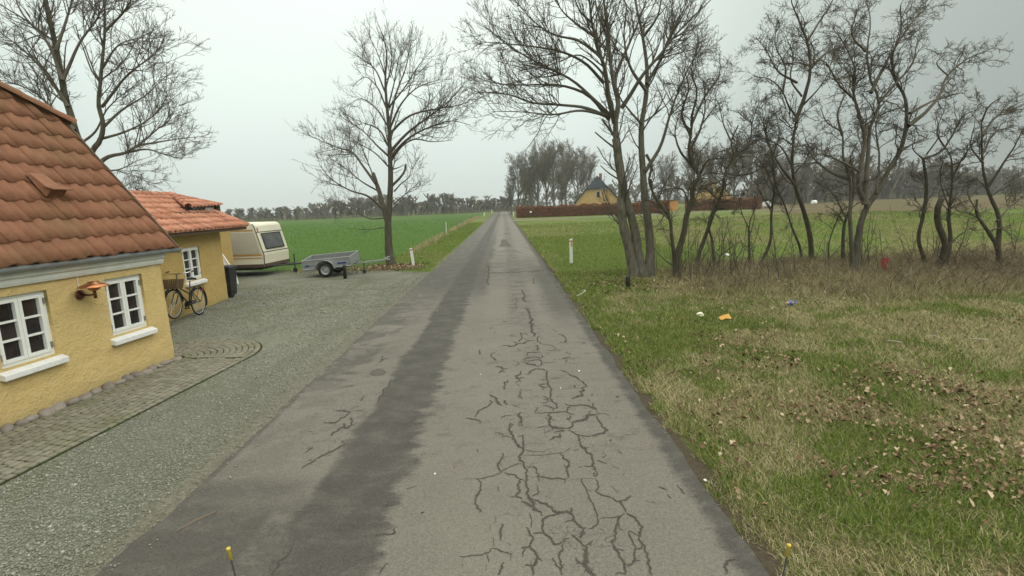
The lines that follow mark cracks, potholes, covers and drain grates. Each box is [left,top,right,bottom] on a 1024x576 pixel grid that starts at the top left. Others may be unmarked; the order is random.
crack [301,380,392,469]
crack [461,247,685,576]
